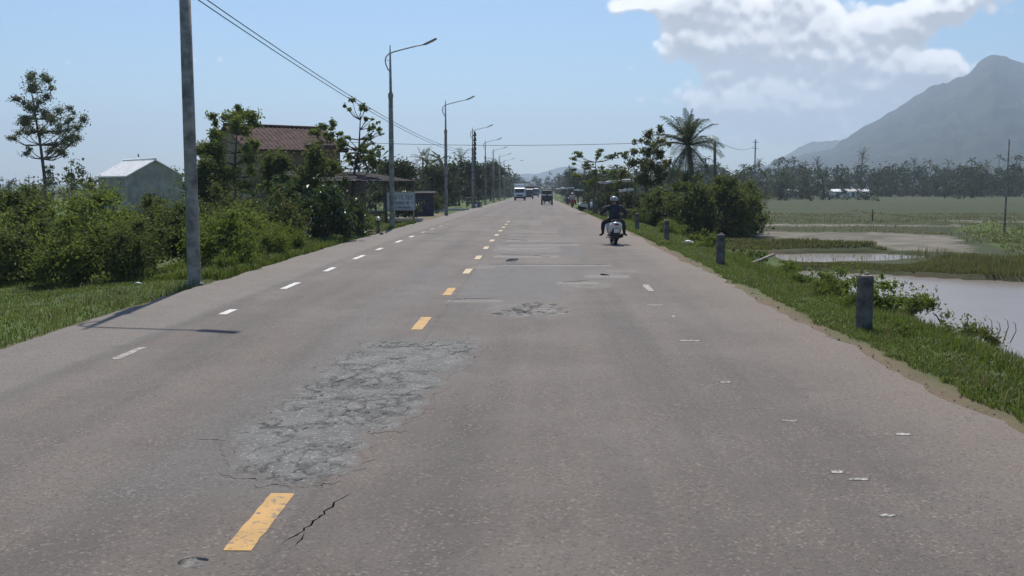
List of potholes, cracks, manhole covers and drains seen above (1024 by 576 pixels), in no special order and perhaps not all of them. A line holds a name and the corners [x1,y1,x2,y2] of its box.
crack [200,338,487,548]
pothole [492,302,569,316]
pothole [177,557,209,569]
